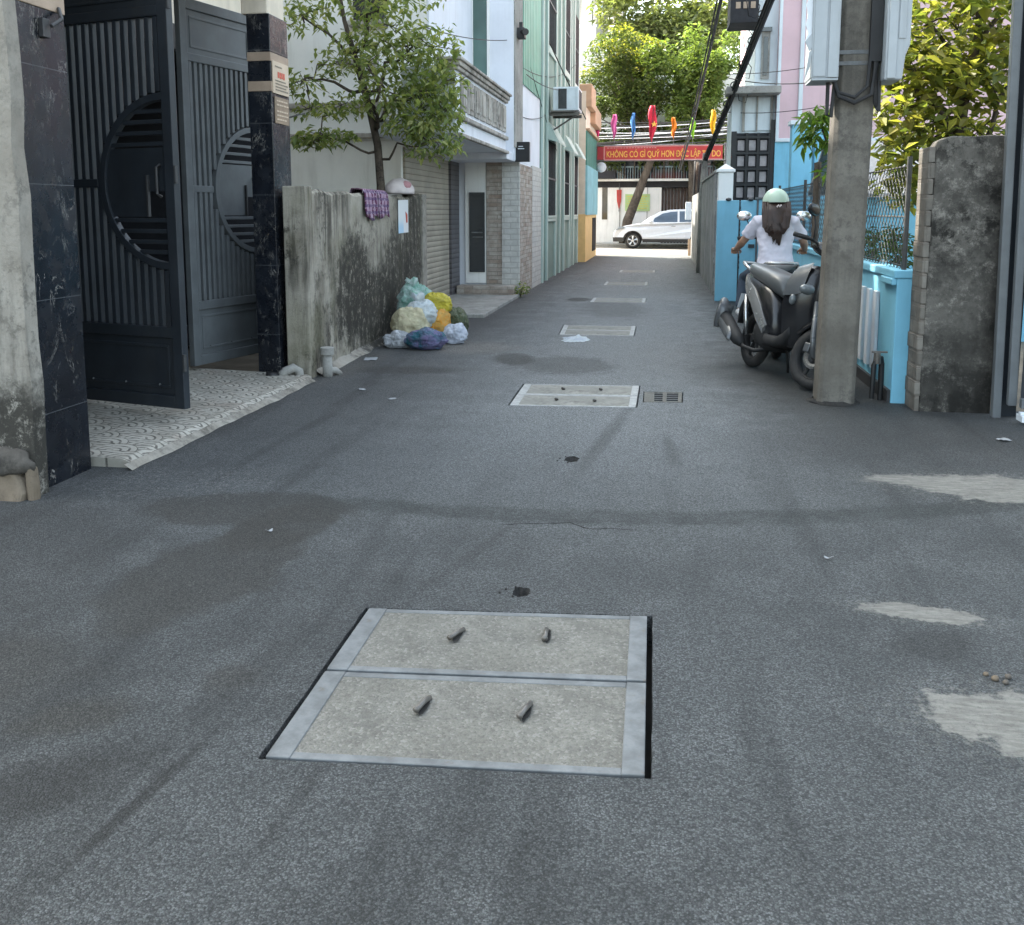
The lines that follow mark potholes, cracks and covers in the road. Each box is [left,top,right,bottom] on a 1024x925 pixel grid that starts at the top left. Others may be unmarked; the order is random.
manhole cover [327,608,647,683]
pothole [498,586,530,597]
manhole cover [510,394,638,408]
drain grate [644,392,682,403]
manhole cover [518,384,639,402]
manhole cover [266,671,646,778]
crack [506,522,627,530]
